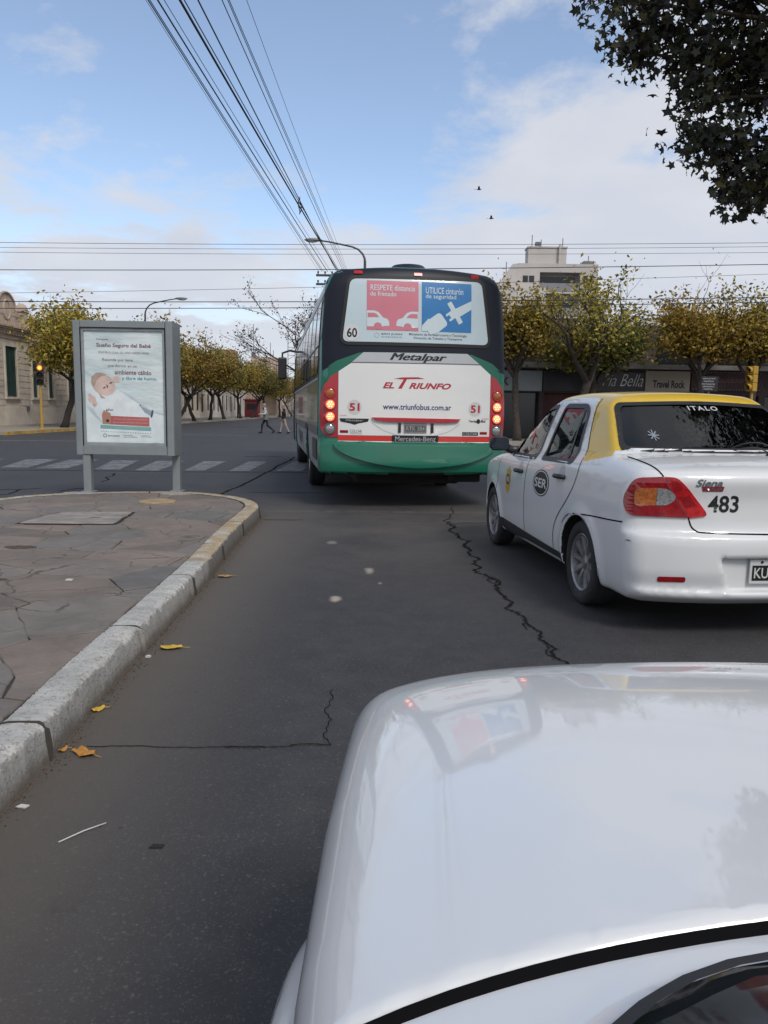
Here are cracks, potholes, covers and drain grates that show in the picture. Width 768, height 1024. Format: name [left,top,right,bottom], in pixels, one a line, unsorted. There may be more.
utility cover [15,512,135,525]
crack [443,507,570,664]
